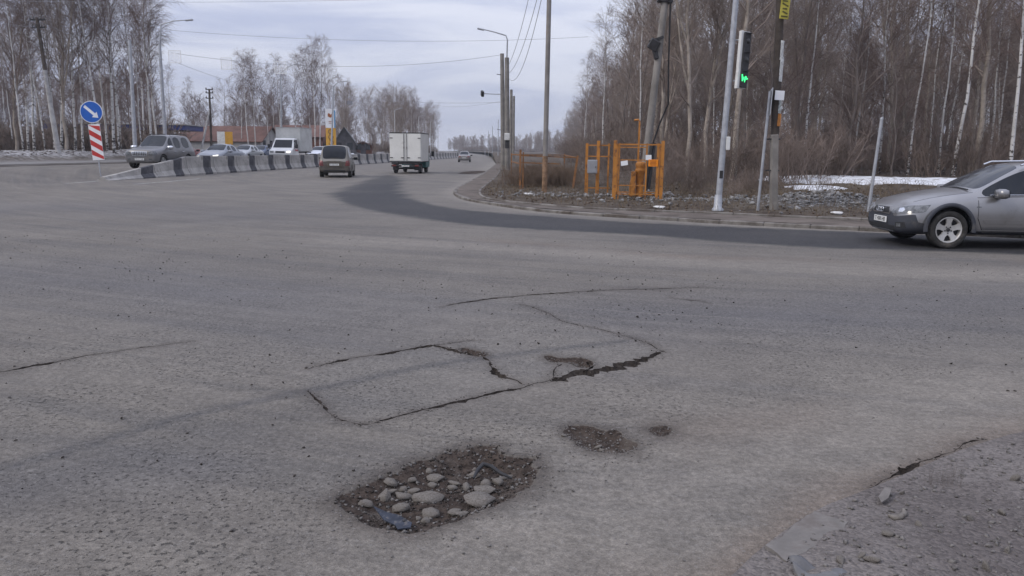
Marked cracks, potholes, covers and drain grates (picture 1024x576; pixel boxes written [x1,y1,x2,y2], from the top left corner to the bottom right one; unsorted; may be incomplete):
pothole [647,425,674,437]
pothole [334,444,541,534]
crack [307,304,664,425]
crack [1,342,183,372]
crack [443,287,703,307]
pothole [562,424,639,454]
